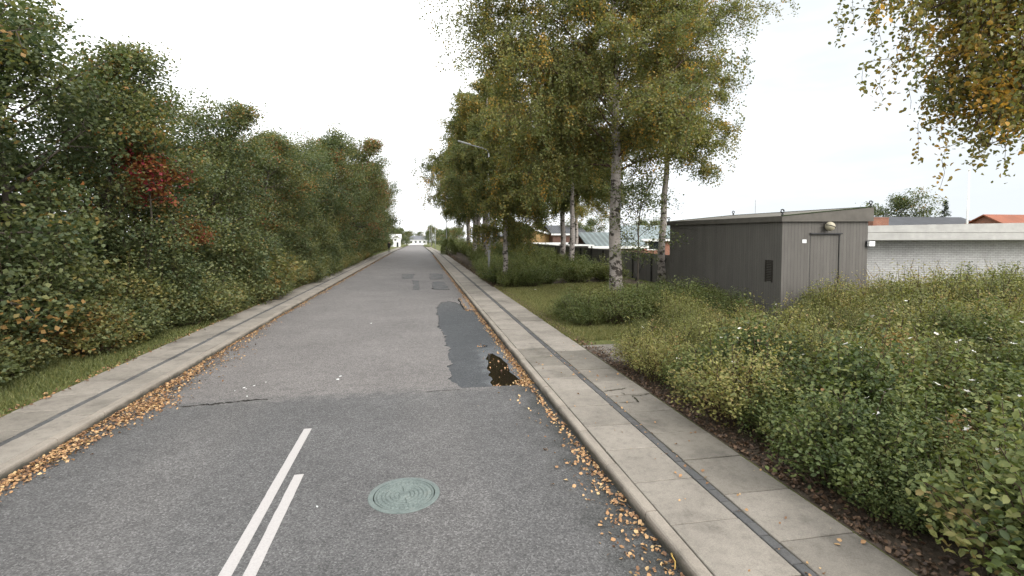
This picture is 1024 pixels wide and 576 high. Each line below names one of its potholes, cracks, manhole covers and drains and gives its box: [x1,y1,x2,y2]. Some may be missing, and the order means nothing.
crack [181,399,268,407]
pothole [486,353,524,386]
manhole cover [368,477,440,514]
